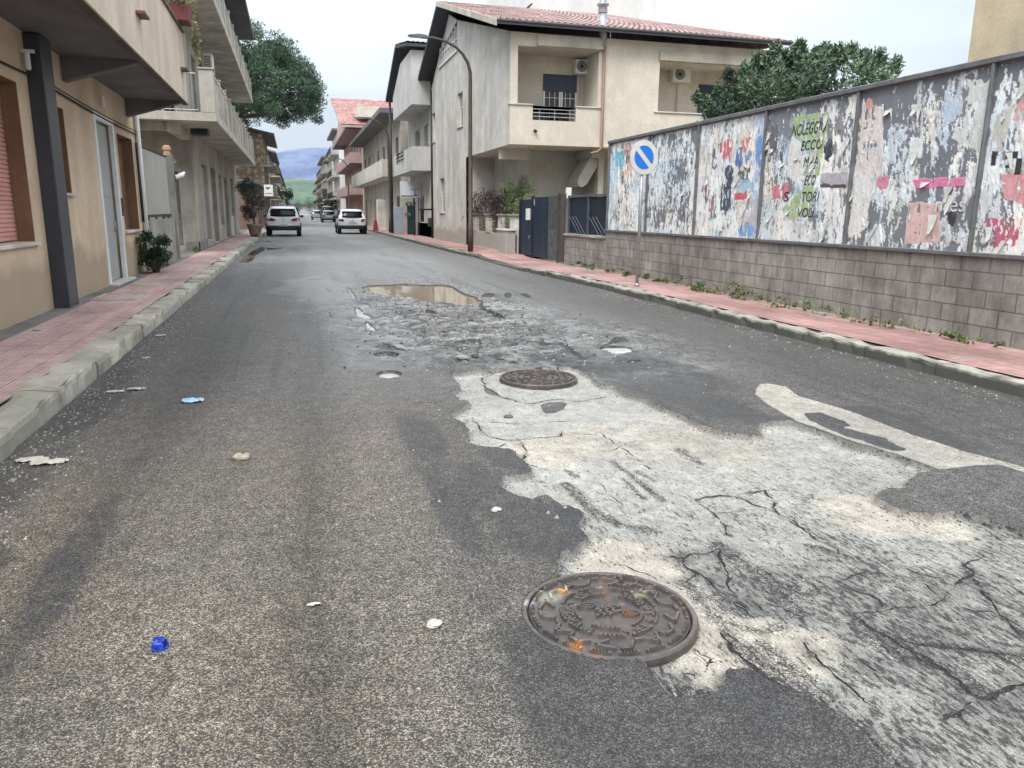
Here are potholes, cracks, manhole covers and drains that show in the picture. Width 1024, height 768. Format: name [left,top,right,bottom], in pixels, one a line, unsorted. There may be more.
pothole [599,346,633,354]
manhole cover [499,369,578,390]
pothole [376,370,403,378]
pothole [373,351,399,359]
crack [624,490,1024,721]
crack [472,420,661,506]
manhole cover [522,572,699,668]
pothole [362,284,482,306]
